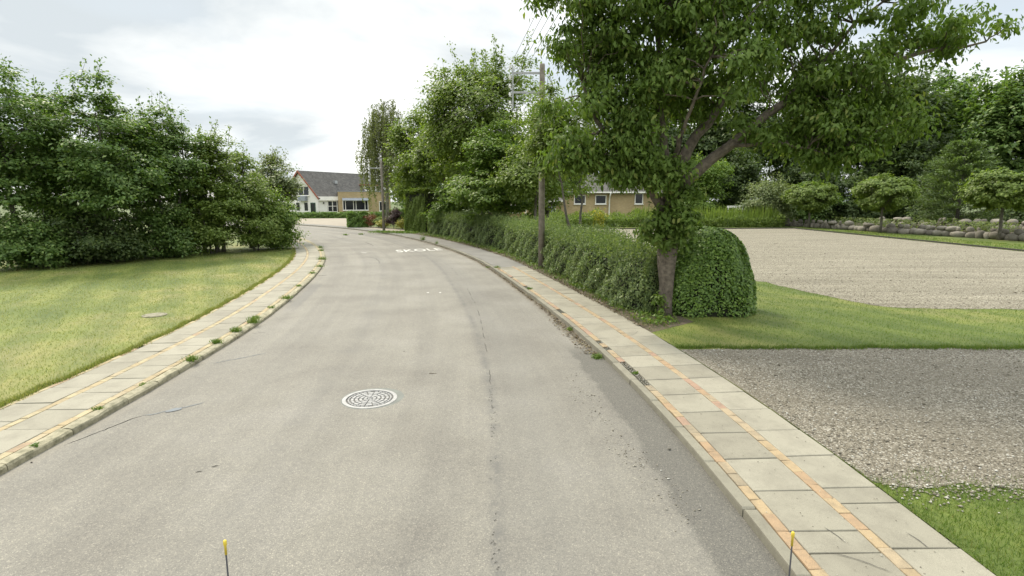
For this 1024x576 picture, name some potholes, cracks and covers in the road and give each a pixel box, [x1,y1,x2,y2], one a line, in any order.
manhole cover [340,388,404,409]
